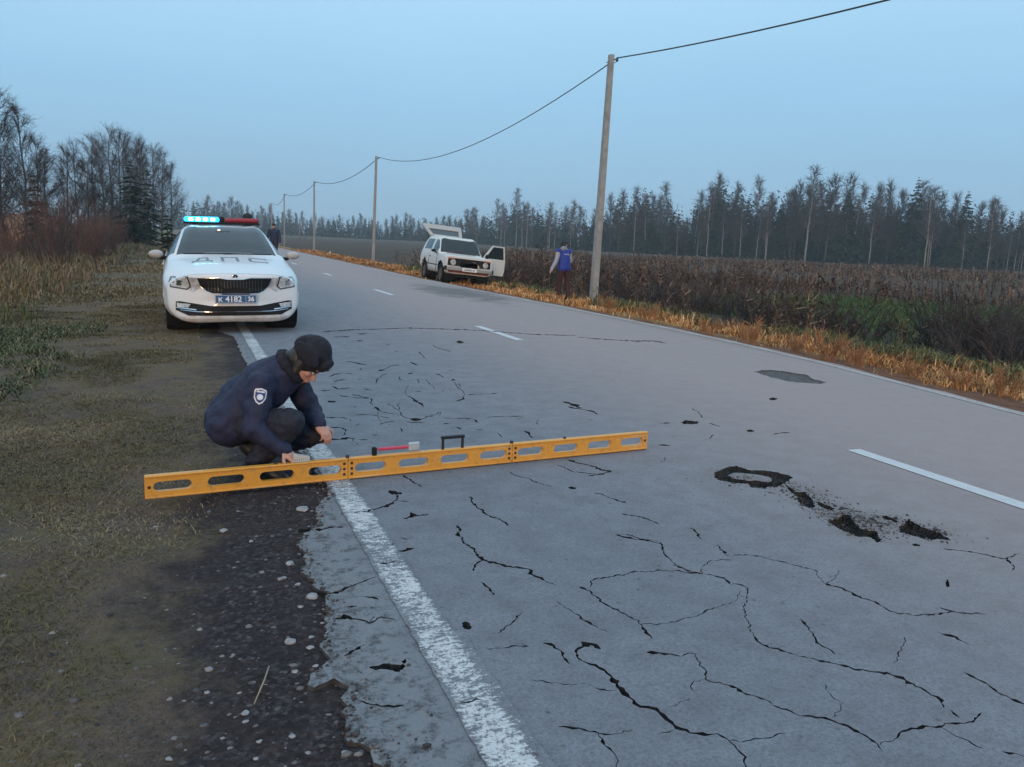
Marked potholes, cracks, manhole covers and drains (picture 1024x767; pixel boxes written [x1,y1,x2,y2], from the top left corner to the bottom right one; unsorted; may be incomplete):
crack [324,327,664,343]
crack [323,333,517,445]
crack [298,475,428,532]
pothole [898,519,950,545]
crack [489,493,981,767]
pothole [828,514,882,543]
crack [965,673,1024,704]
crack [318,538,414,624]
crack [946,549,1015,571]
crack [455,497,555,595]
crack [510,459,612,487]
pothole [714,466,793,489]
